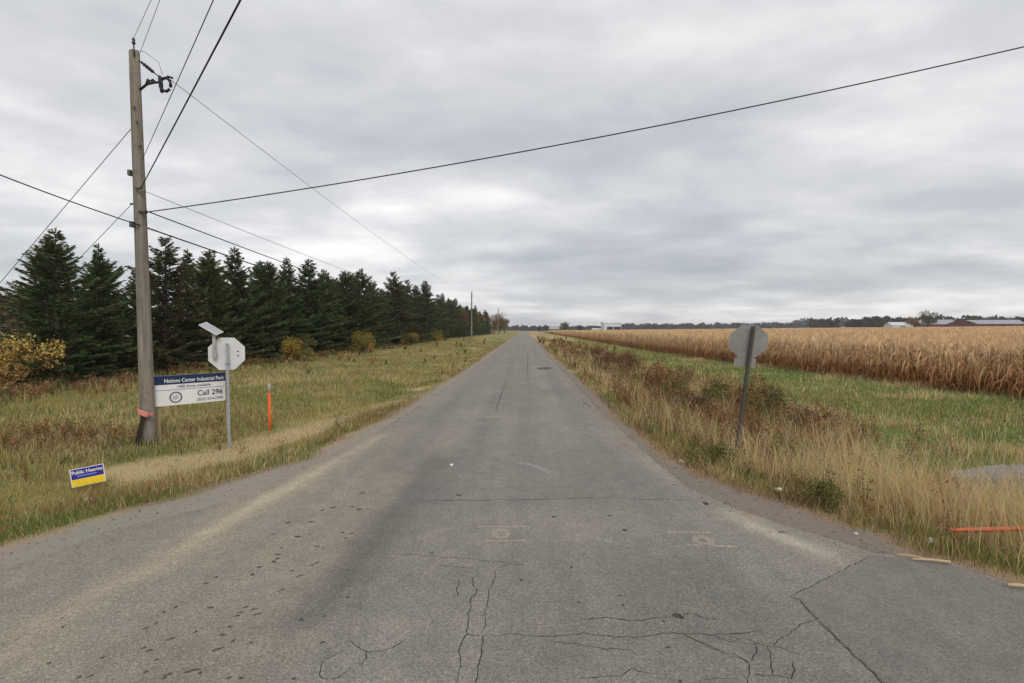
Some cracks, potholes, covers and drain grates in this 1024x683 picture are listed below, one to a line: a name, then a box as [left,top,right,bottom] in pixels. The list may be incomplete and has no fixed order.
crack [410,554,816,683]
crack [319,640,404,679]
